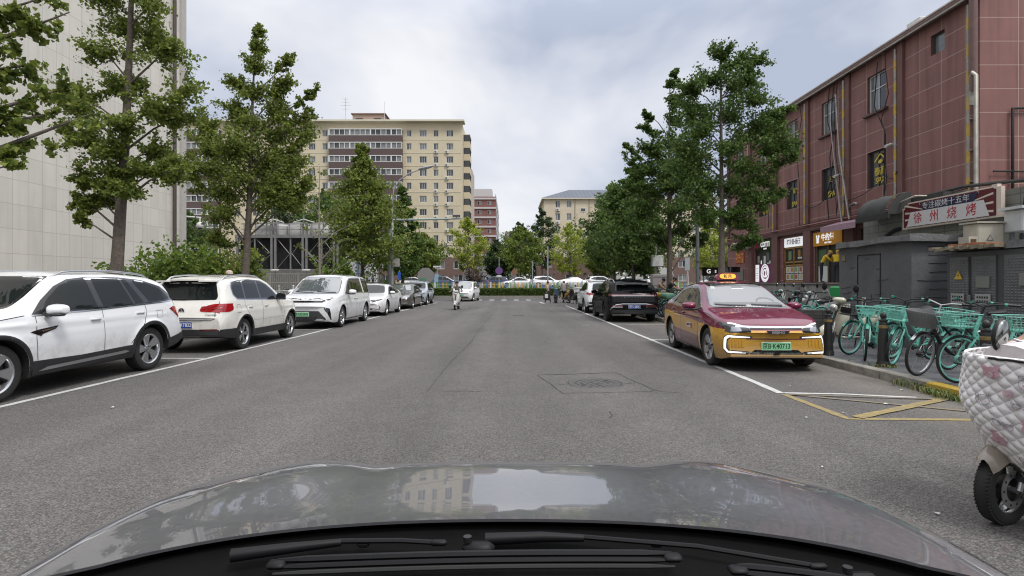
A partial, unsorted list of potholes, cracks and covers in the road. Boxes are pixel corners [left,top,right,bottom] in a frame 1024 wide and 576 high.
manhole cover [565,378,625,389]
